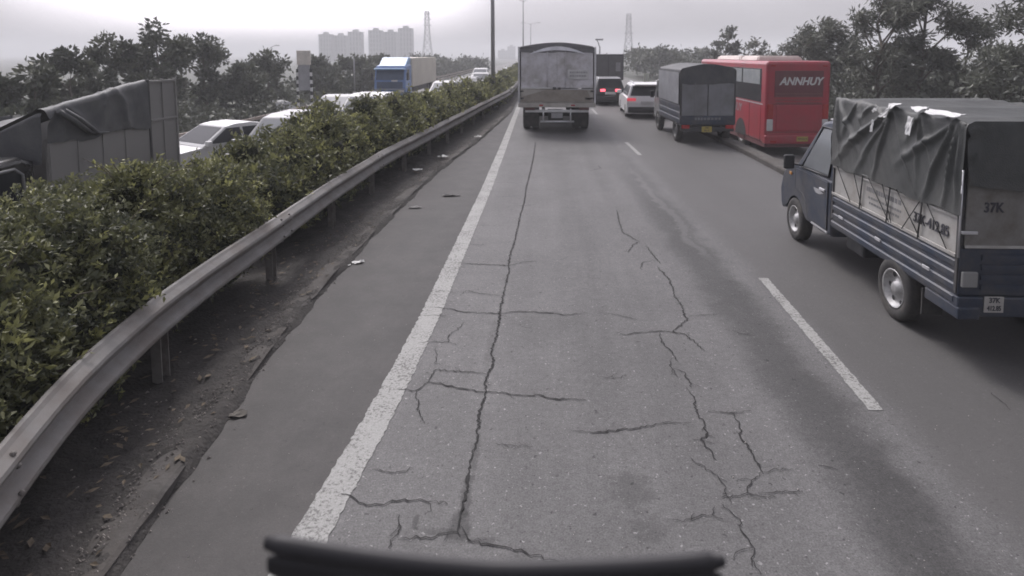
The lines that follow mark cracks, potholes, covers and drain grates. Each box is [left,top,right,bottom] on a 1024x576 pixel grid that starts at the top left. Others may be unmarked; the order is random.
crack [572,210,802,574]
crack [341,142,633,560]
